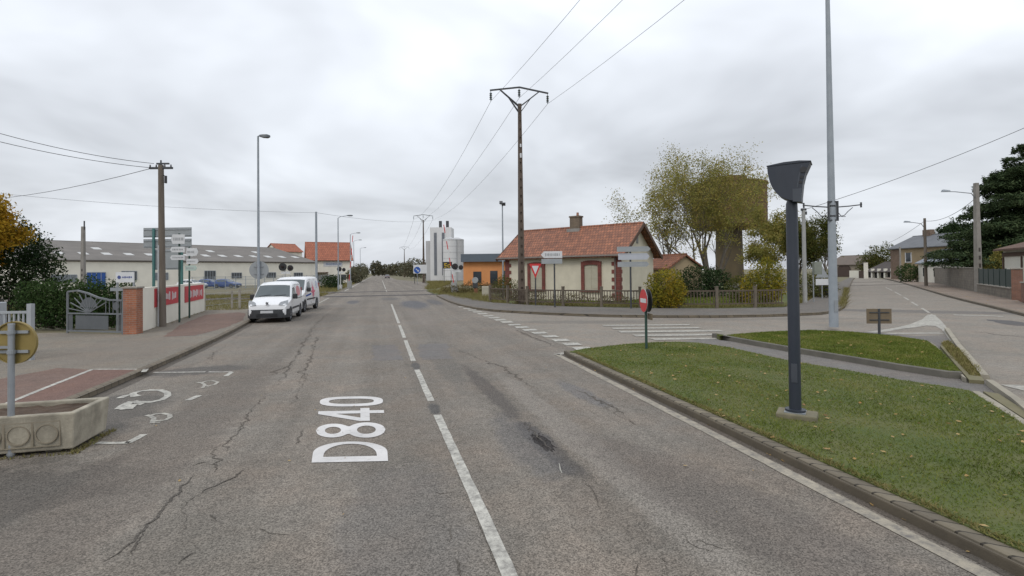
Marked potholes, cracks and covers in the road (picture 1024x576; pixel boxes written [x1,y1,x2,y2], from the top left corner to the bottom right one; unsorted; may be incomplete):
crack [662,528,724,574]
pothole [529,432,558,455]
crack [575,389,634,424]
crack [108,315,326,562]
